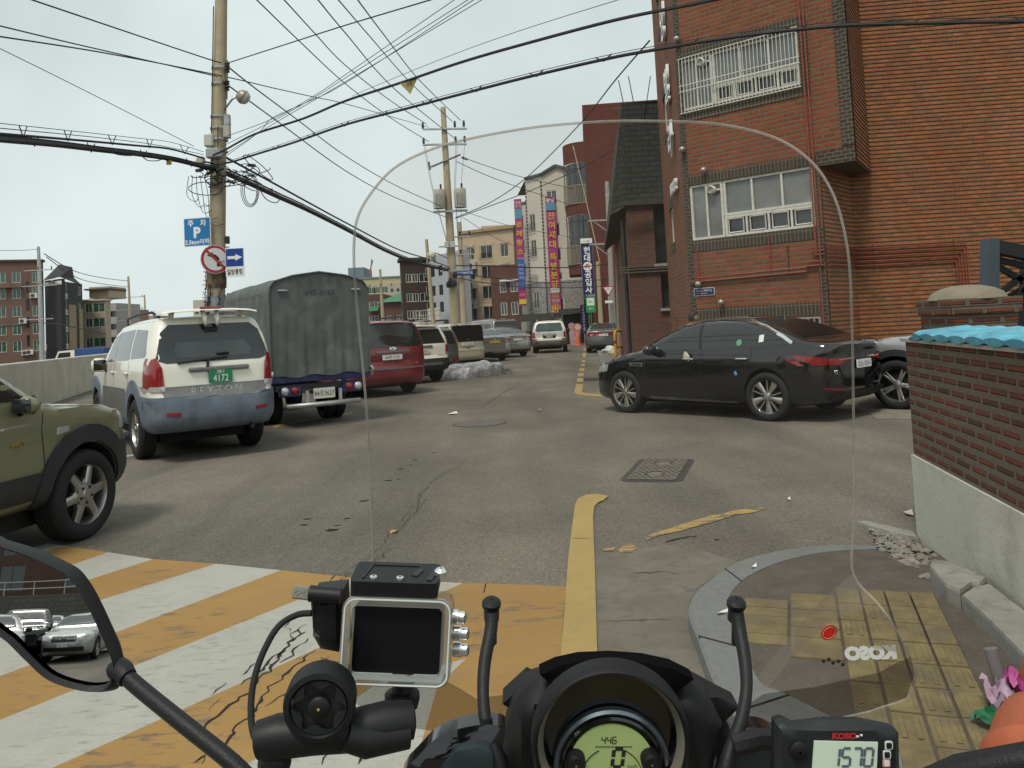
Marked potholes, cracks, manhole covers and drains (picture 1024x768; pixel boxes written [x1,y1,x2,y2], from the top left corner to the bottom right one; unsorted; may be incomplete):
crack [330,463,461,581]
crack [188,623,328,763]
manhole cover [621,458,694,482]
